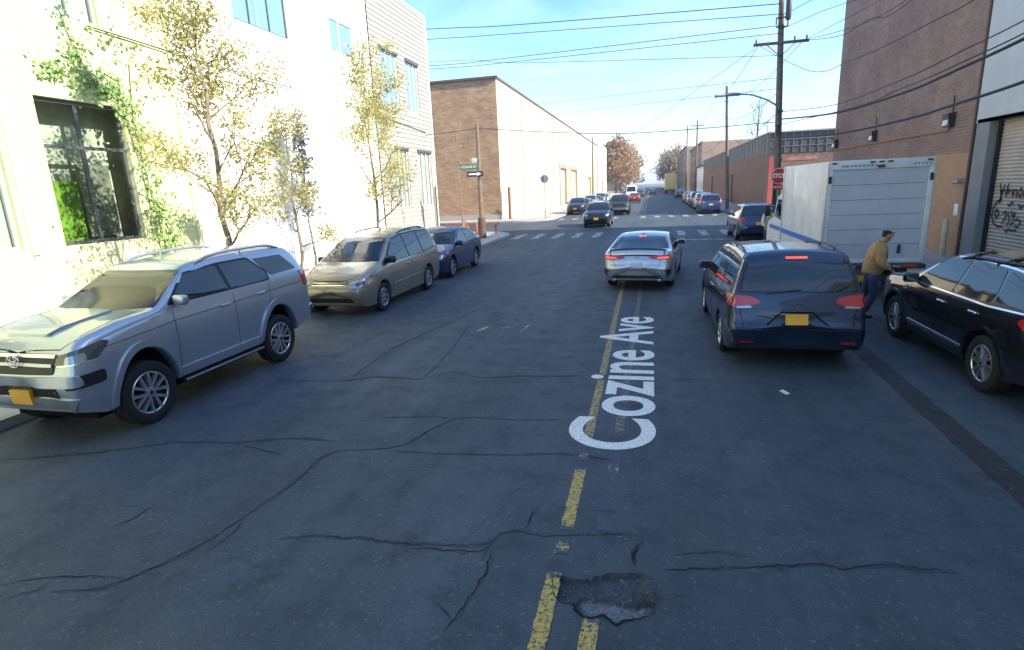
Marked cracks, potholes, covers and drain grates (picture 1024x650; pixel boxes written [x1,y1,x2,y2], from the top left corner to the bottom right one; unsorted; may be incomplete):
pothole [551,573,659,626]
crack [277,306,577,381]
crack [665,551,959,574]
crack [3,416,643,633]
